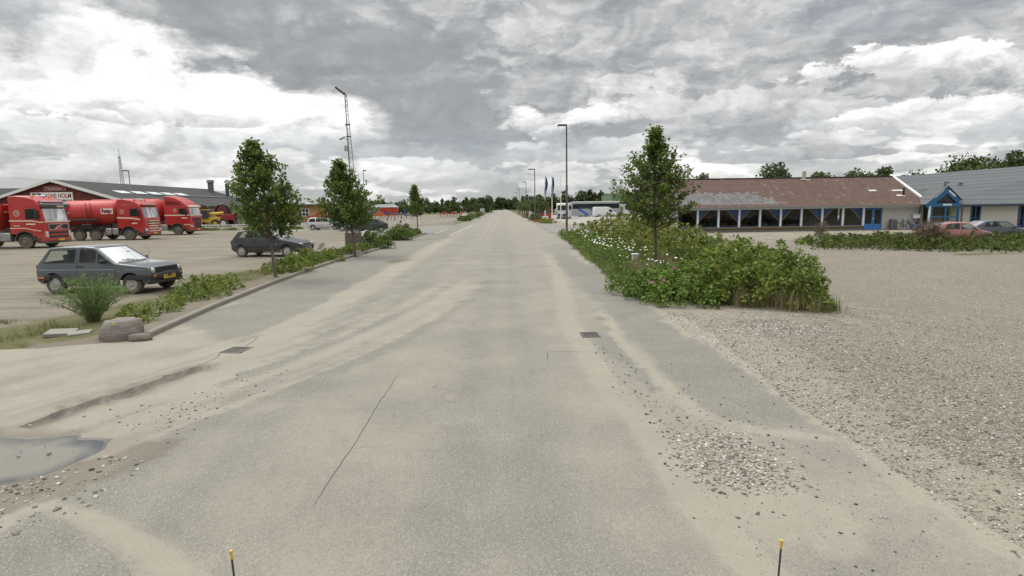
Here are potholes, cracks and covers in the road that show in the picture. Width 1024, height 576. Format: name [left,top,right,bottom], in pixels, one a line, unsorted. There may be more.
crack [312,376,397,509]
pothole [0,432,113,486]
